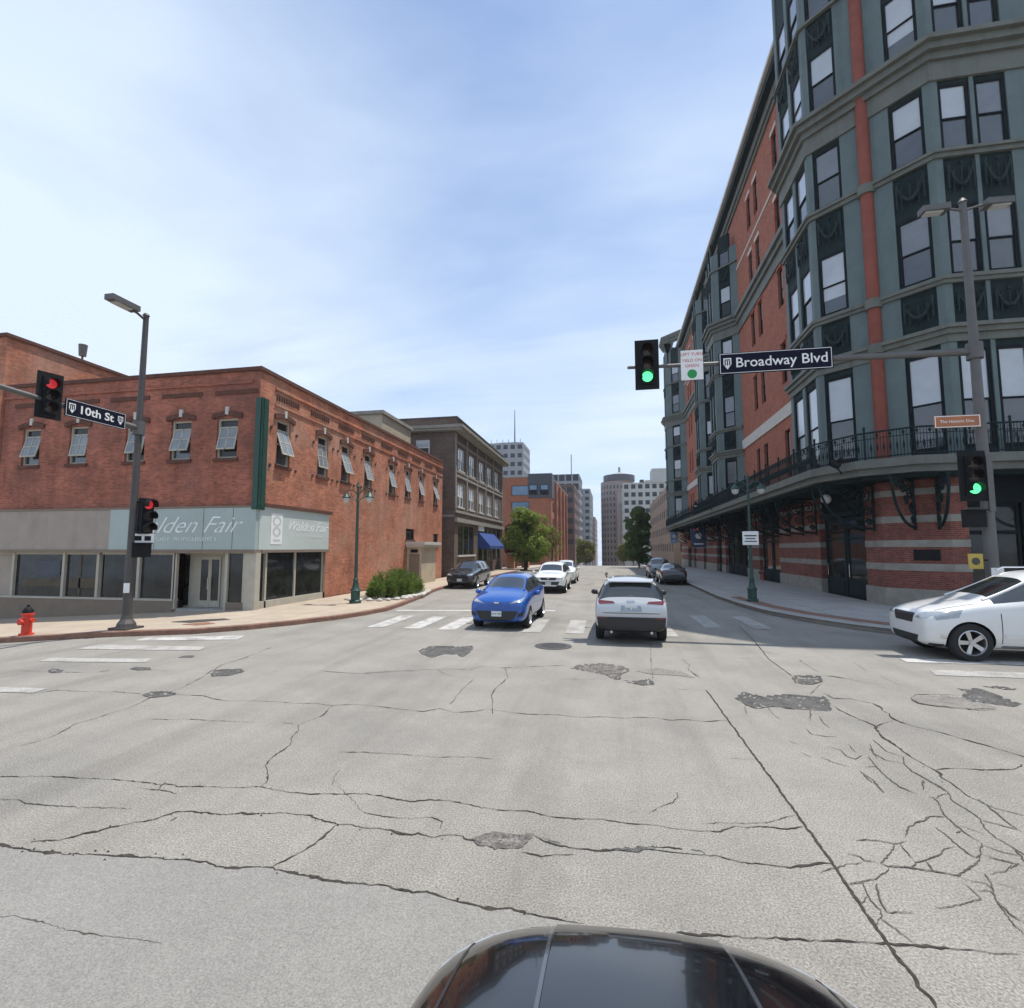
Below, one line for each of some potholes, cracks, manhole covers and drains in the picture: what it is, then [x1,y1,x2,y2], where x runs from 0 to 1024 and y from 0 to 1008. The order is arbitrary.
crack [526,664,1024,954]
crack [28,647,724,744]
crack [0,710,803,924]
crack [1,915,160,943]
